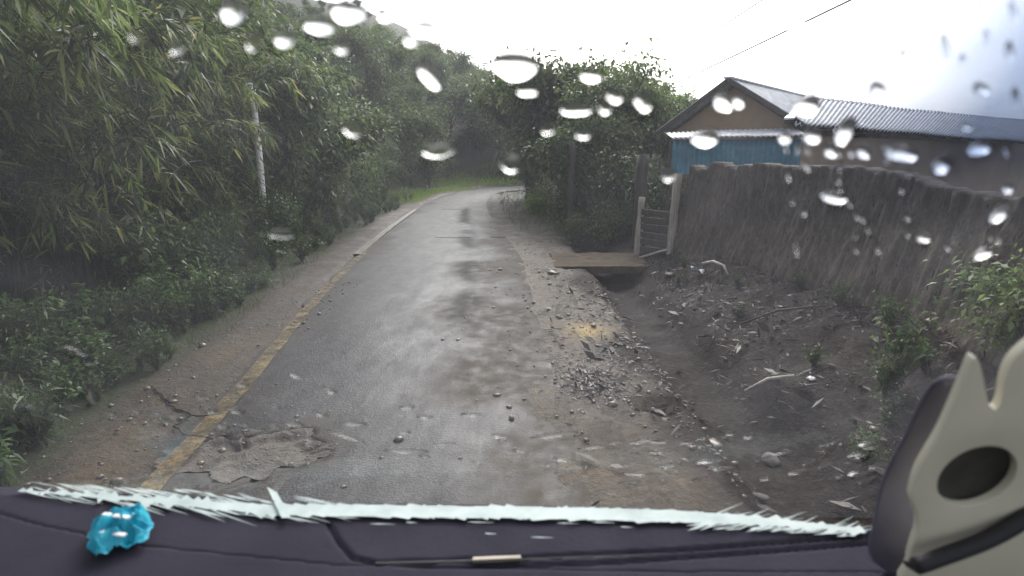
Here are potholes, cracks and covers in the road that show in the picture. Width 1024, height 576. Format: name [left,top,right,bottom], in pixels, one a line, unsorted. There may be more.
pothole [154,428,336,483]
crack [151,386,219,440]
